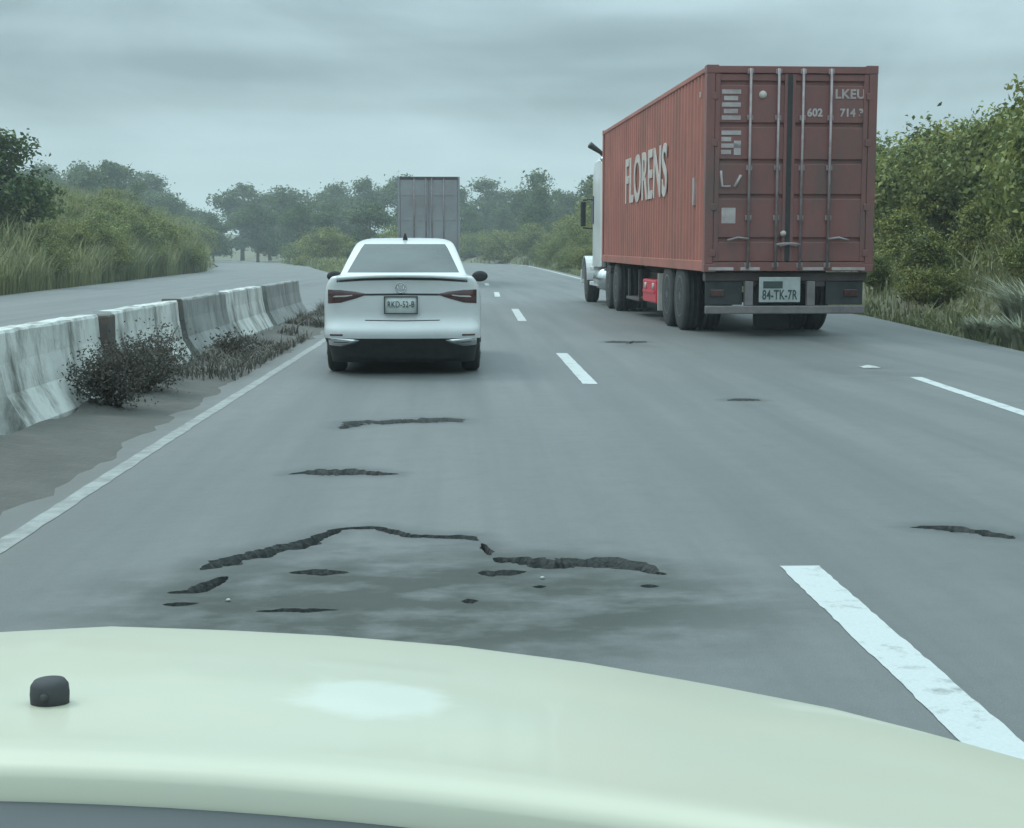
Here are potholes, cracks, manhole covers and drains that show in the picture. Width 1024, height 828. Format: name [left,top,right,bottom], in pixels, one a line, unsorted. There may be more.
crack [162,526,667,613]
crack [339,418,466,429]
